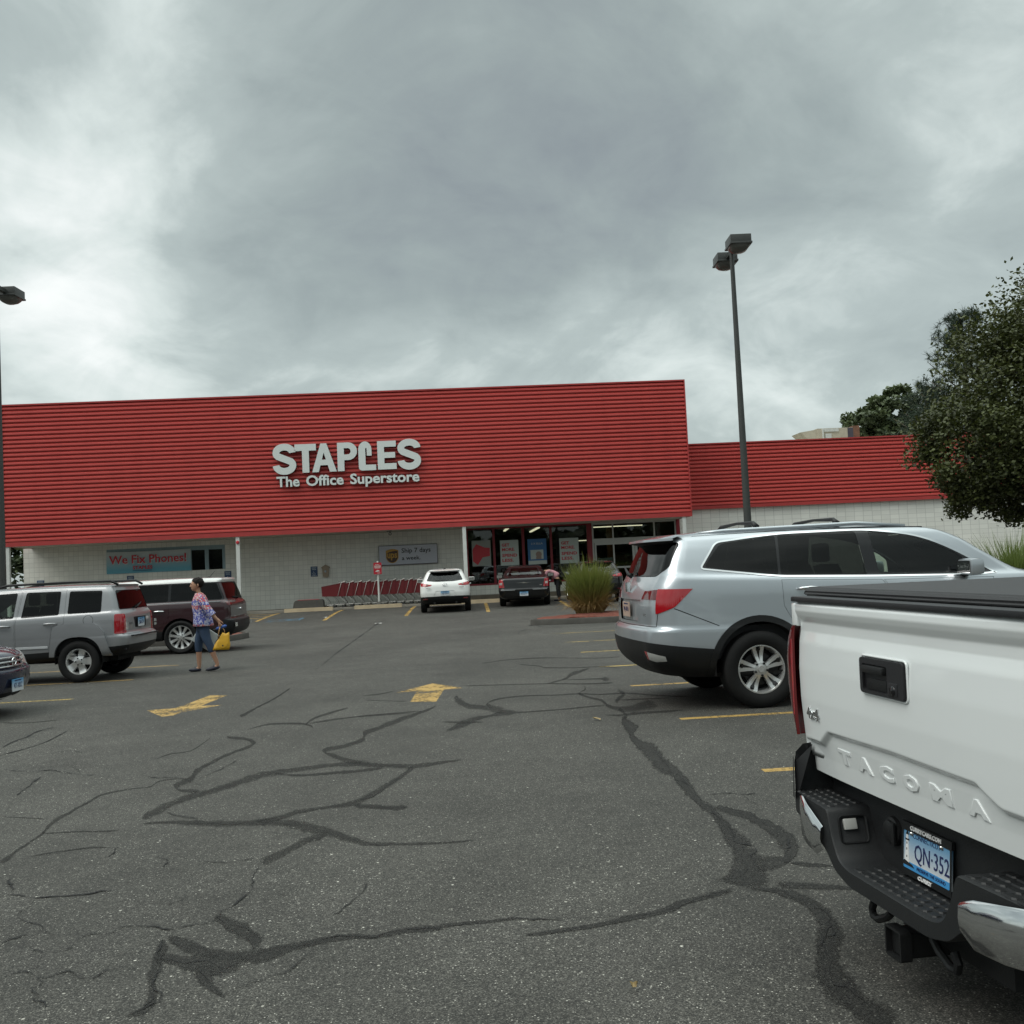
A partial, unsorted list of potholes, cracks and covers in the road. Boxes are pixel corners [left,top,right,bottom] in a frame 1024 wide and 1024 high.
crack [1,792,756,1016]
crack [487,657,617,668]
crack [2,721,237,818]
crack [364,692,404,716]
